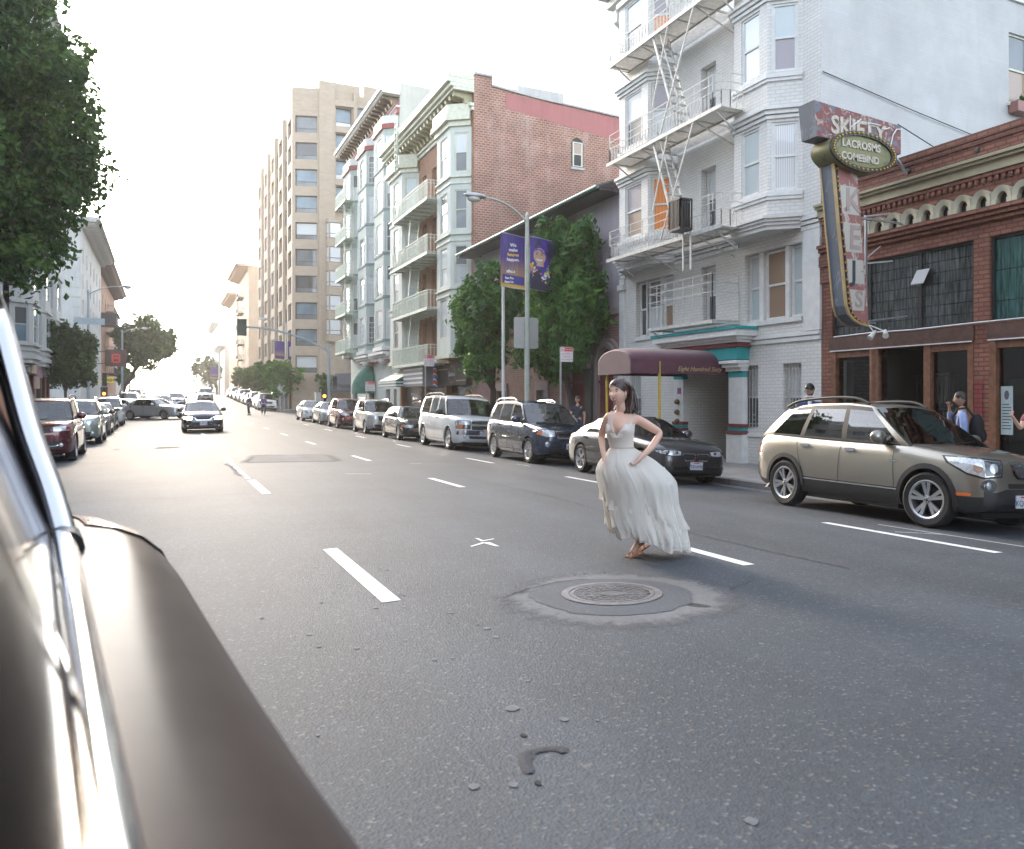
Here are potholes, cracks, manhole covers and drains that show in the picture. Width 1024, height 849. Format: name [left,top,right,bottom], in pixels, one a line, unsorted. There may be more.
manhole cover [561,582,662,606]
